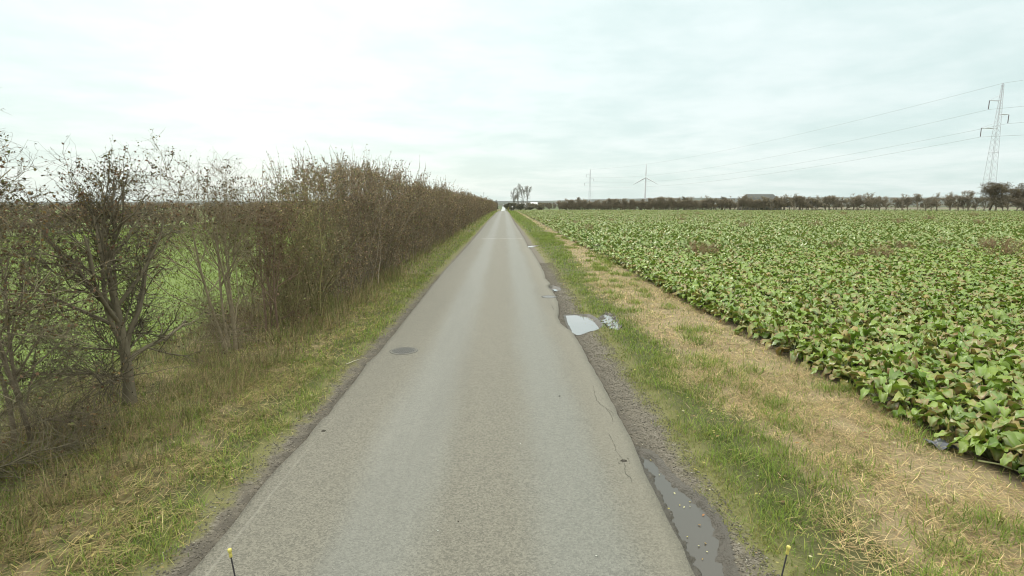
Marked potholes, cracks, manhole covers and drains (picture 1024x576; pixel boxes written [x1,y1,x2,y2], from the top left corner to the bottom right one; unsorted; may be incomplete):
pothole [635,446,740,576]
pothole [564,314,603,335]
pothole [597,312,622,330]
manhole cover [389,347,418,355]
